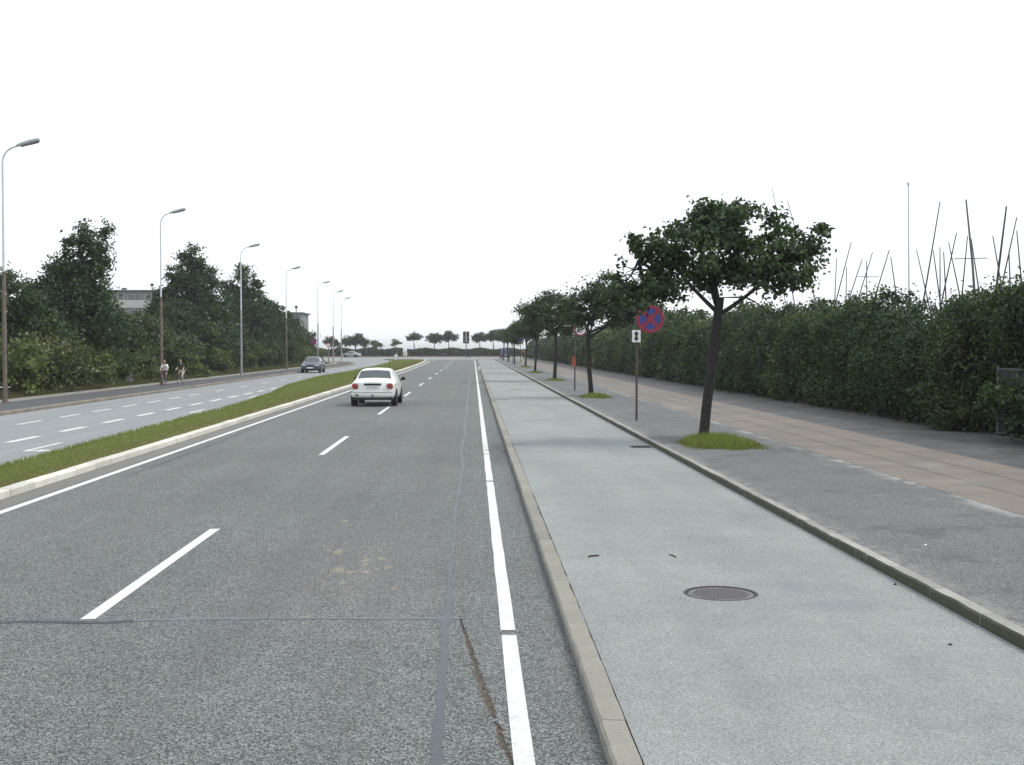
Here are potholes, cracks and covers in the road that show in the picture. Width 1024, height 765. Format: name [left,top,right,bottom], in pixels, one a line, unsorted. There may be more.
crack [460,616,514,765]
manhole cover [683,586,758,601]
